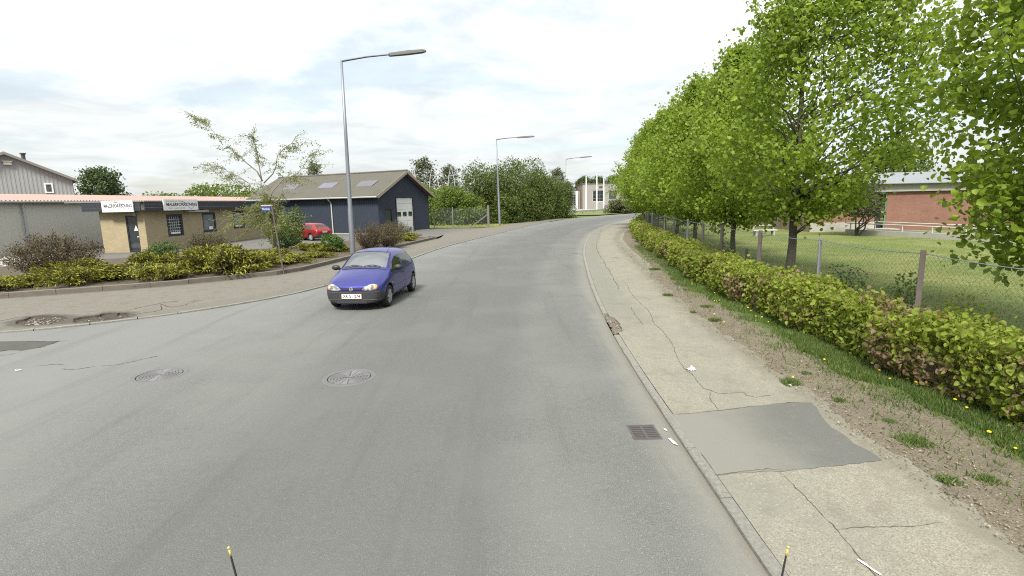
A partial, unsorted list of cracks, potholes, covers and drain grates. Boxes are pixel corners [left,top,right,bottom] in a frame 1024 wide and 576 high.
pothole [16,315,67,326]
drain grate [626,424,663,440]
manhole cover [129,367,189,383]
manhole cover [322,369,376,386]
crack [628,286,769,409]
pothole [73,313,129,323]
pothole [605,316,622,334]
